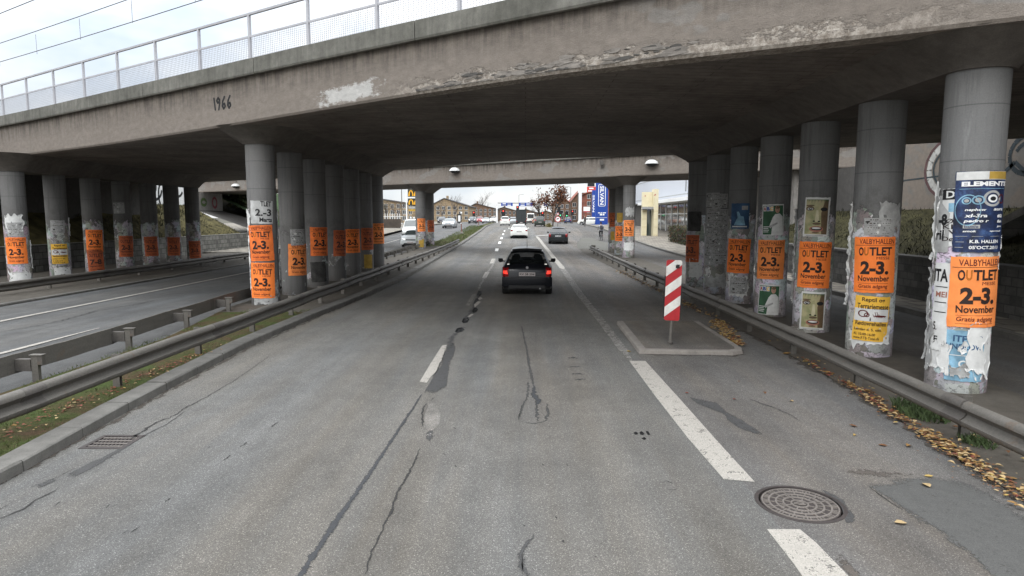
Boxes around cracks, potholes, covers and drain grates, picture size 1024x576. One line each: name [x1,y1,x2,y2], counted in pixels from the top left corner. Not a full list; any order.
manhole cover [754,485,848,524]
crack [130,356,269,439]
drain grate [78,435,146,449]
crack [365,450,419,574]
crack [518,382,549,424]
crack [517,534,534,576]
